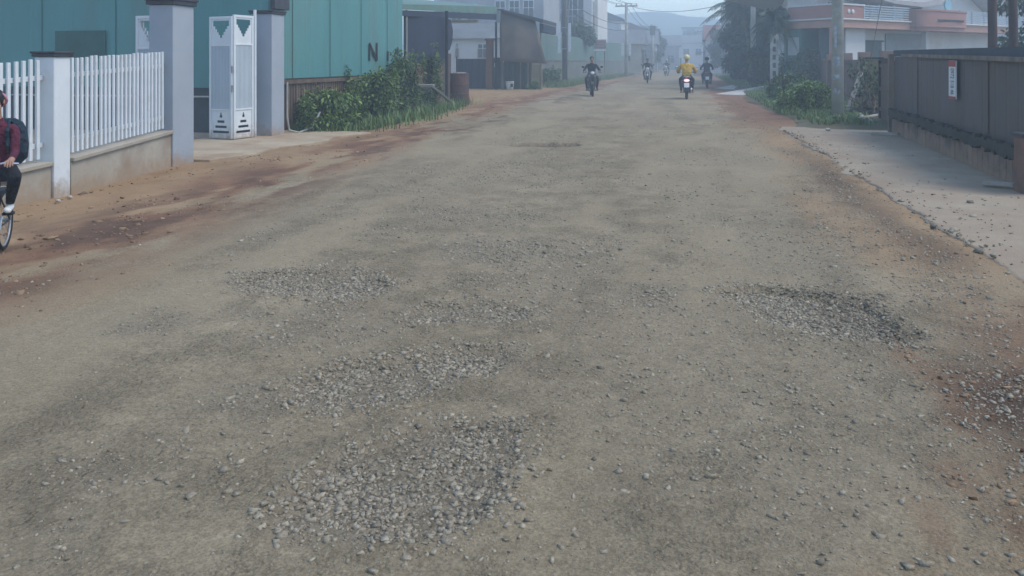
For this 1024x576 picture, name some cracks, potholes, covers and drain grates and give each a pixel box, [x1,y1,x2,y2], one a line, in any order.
pothole [197,262,420,310]
pothole [254,338,529,424]
pothole [698,277,936,359]
pothole [384,293,555,328]
pothole [222,405,565,565]
